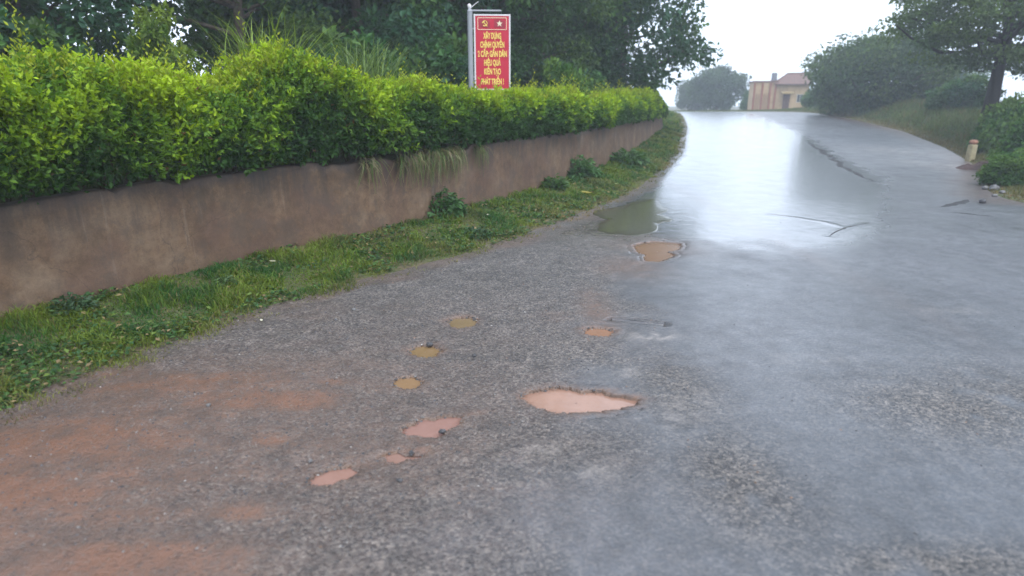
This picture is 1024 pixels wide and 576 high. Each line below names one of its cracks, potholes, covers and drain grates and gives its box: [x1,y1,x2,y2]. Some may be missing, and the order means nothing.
pothole [394,339,455,363]
pothole [504,379,656,420]
pothole [626,239,687,263]
crack [765,213,877,238]
crack [933,199,994,218]
pothole [286,455,387,496]
pothole [383,407,477,456]
crack [802,141,883,182]
pothole [351,435,446,472]
pothole [435,312,490,332]
pothole [377,369,437,395]
pothole [572,323,626,340]
